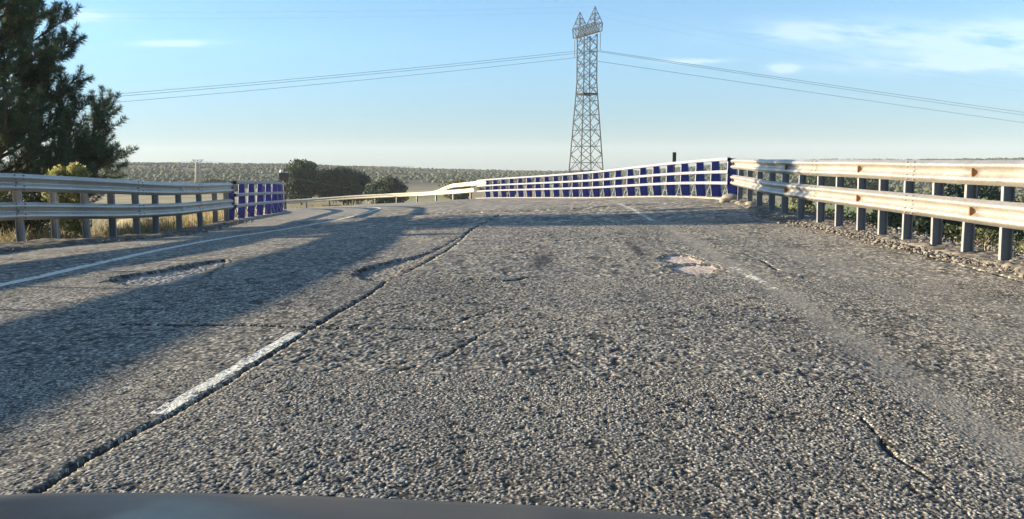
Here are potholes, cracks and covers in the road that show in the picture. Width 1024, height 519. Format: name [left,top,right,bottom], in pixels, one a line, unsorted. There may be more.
crack [39,283,438,493]
pothole [348,237,462,282]
pothole [96,258,233,286]
crack [836,409,928,478]
crack [401,314,494,372]
